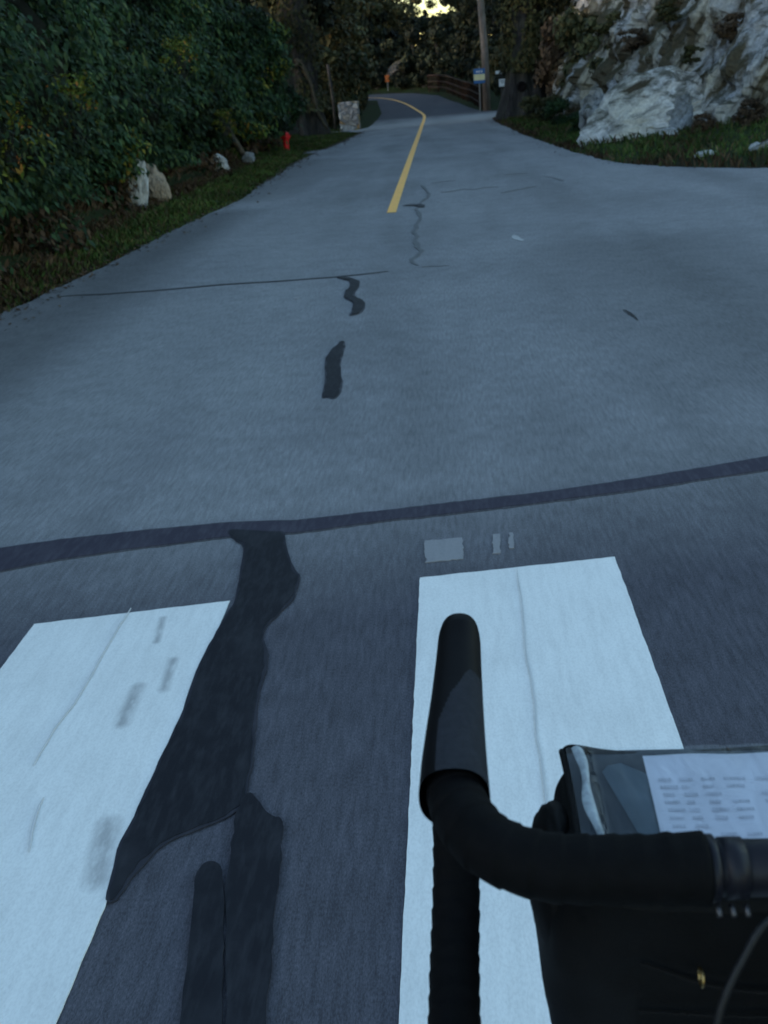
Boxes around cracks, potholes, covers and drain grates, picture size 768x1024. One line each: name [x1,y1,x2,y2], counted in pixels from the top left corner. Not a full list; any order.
crack [60,173,564,297]
